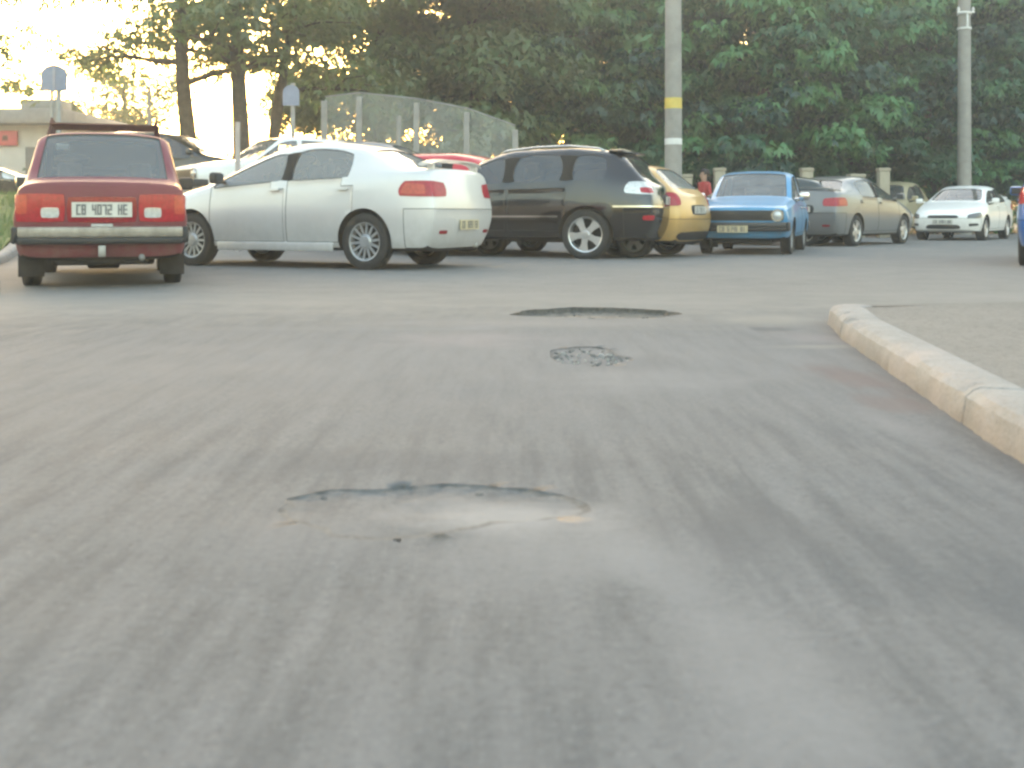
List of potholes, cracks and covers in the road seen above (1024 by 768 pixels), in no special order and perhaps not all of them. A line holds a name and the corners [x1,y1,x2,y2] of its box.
pothole [509,307,682,319]
pothole [549,347,633,367]
pothole [278,483,592,540]
